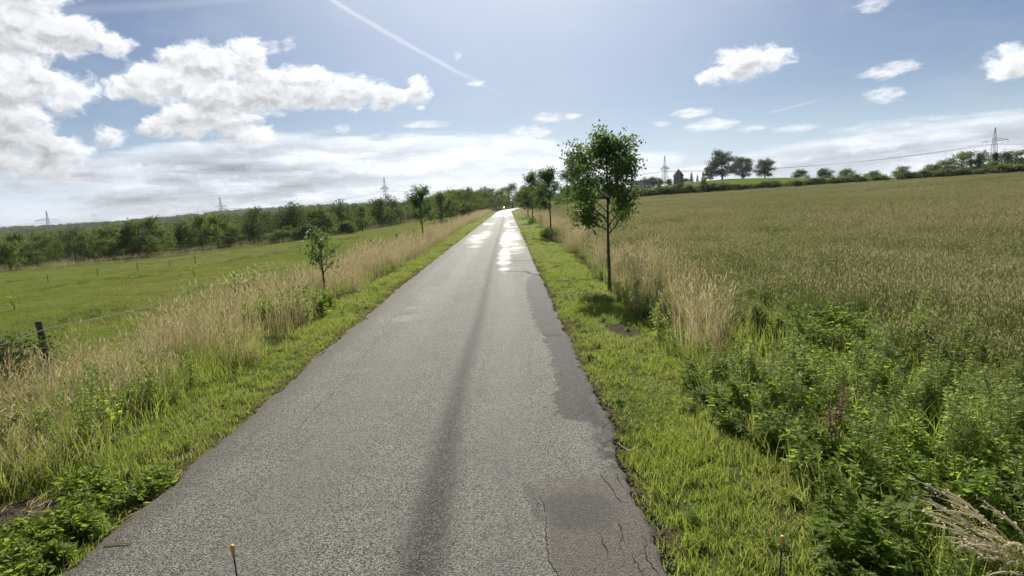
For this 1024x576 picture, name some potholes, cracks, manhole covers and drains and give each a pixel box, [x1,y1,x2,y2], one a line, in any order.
crack [601,520,659,576]
crack [539,495,559,576]
